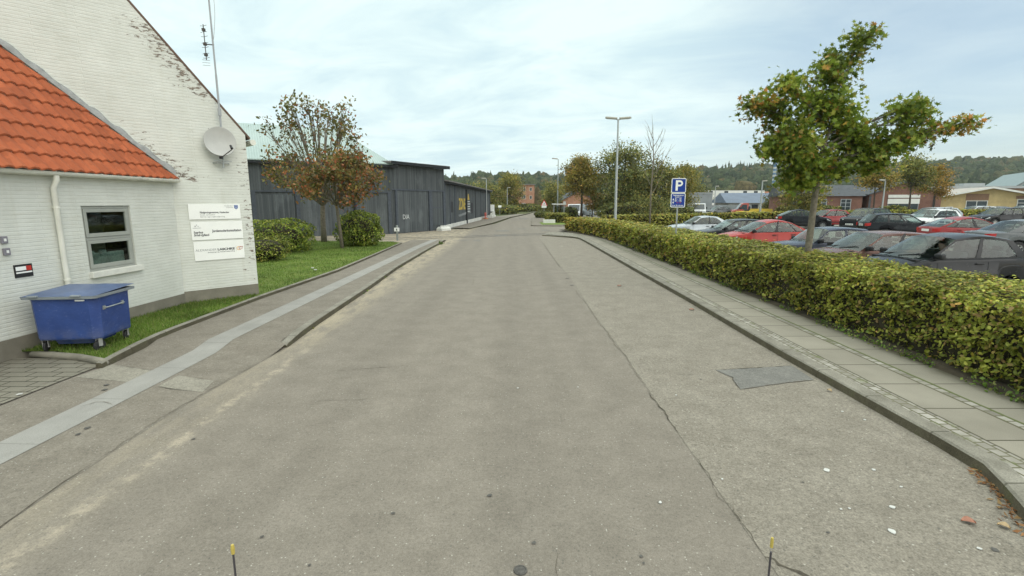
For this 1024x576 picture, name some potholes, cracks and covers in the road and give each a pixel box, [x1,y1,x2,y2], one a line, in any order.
crack [576,290,677,431]
crack [699,461,809,576]
